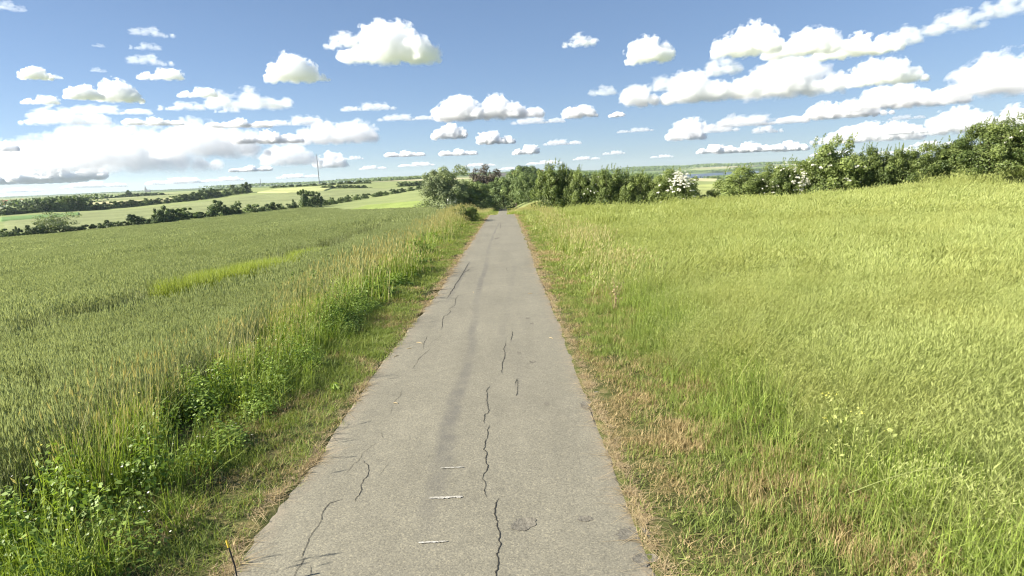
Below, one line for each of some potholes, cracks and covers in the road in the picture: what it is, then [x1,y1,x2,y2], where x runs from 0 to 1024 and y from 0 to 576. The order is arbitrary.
crack [277,500,338,576]
crack [416,263,481,364]
crack [482,332,518,575]
